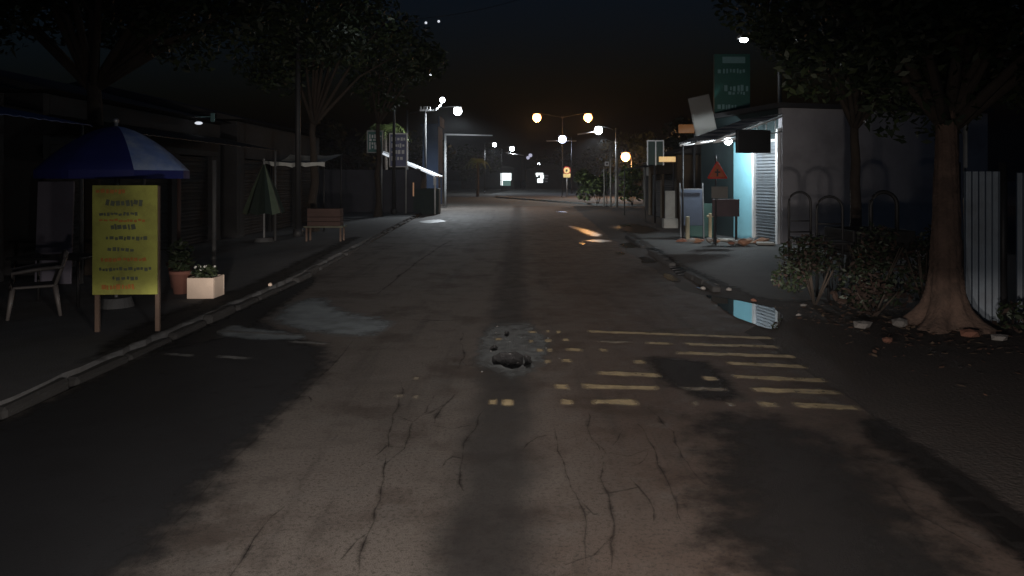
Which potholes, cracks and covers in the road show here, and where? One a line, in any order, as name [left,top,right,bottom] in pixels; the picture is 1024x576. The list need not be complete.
pothole [492,352,525,369]
crack [566,423,678,568]
crack [342,392,478,562]
